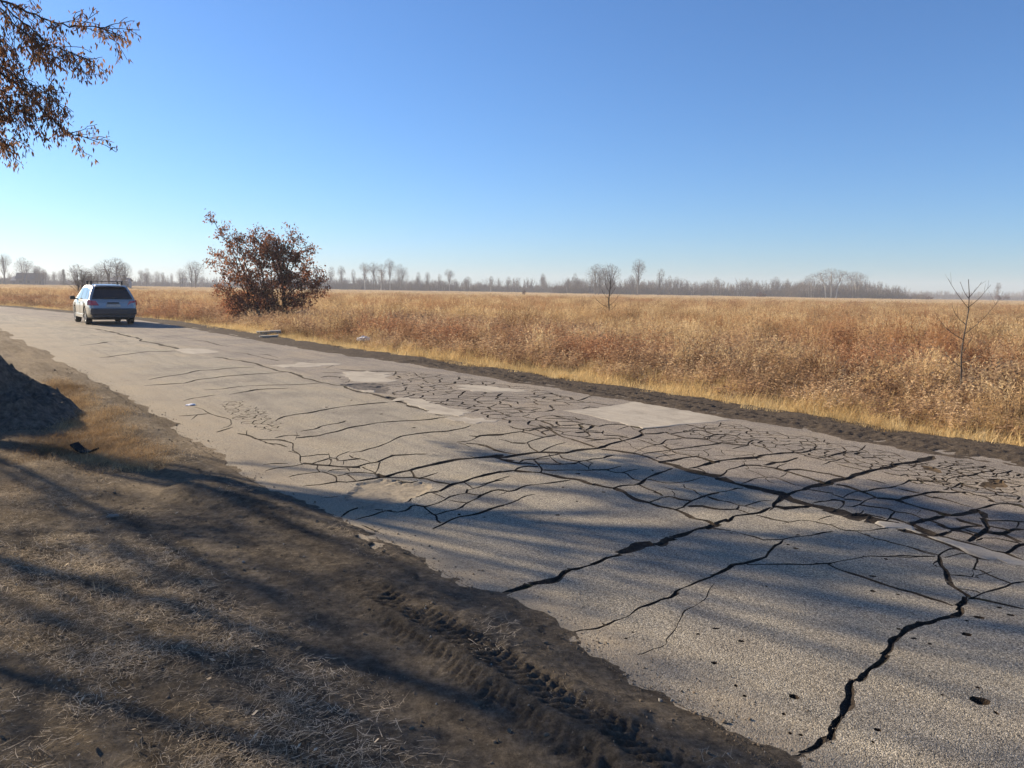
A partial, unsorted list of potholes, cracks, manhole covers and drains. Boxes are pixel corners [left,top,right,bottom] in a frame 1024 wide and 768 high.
crack [144,367,1024,757]
pothole [969,696,991,705]
